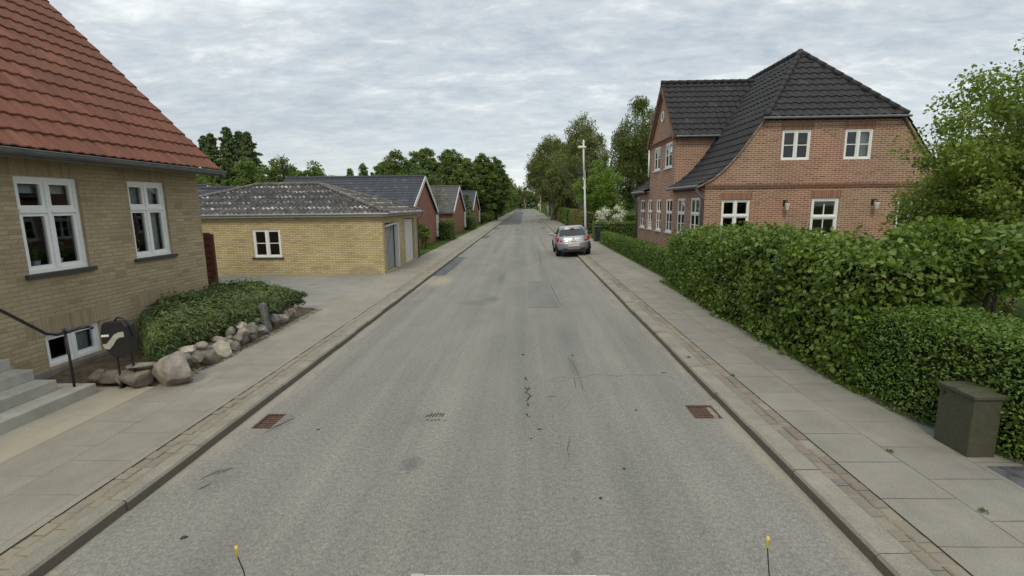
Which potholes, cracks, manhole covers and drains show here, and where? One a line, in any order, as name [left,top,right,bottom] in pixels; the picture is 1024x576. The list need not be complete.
crack [549,358,669,397]
